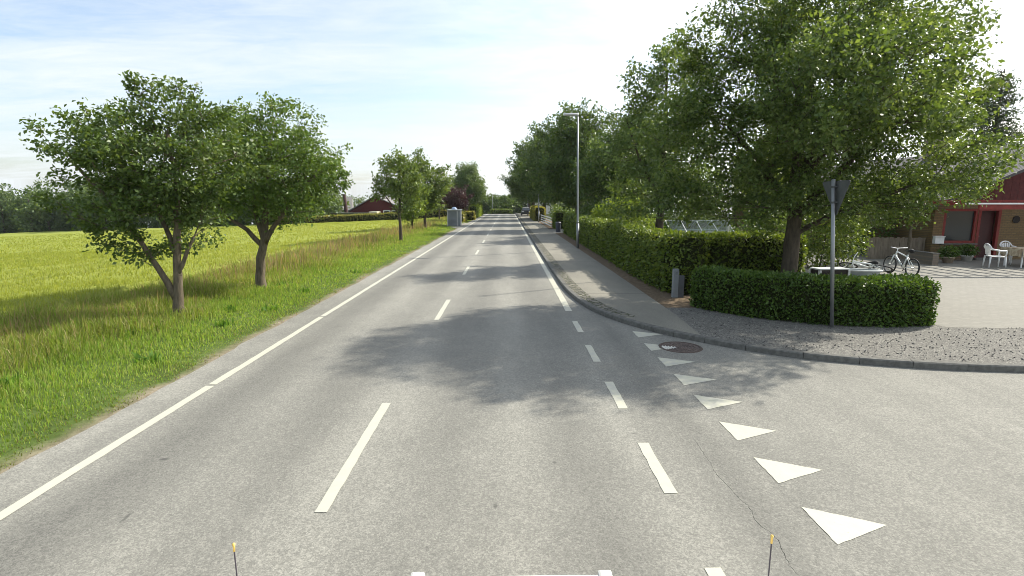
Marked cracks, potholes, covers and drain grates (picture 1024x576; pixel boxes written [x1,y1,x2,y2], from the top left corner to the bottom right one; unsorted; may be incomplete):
manhole cover [659,341,703,353]
